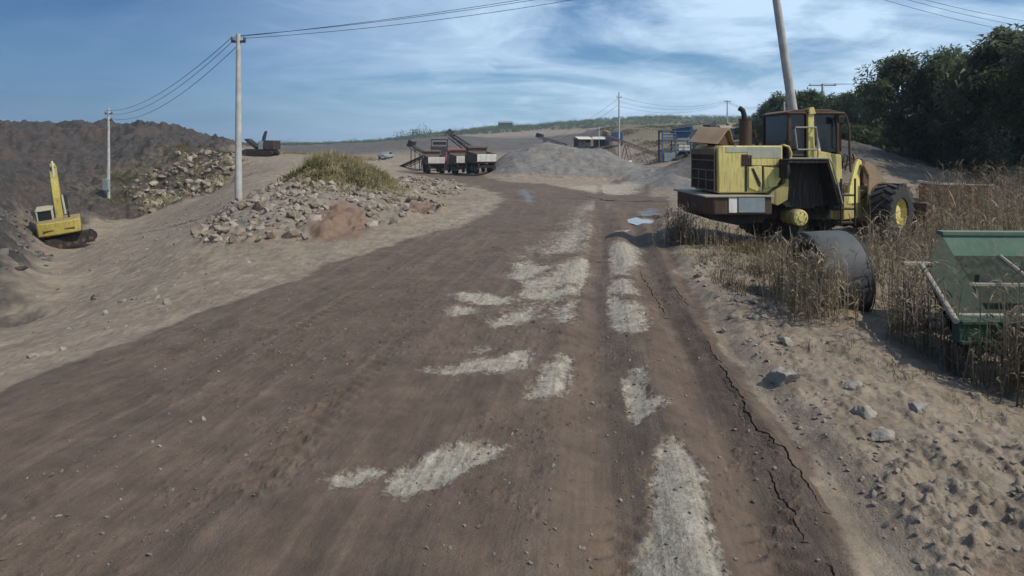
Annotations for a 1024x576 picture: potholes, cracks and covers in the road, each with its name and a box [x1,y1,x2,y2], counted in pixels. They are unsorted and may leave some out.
crack [820,560,840,576]
crack [636,268,692,319]
crack [702,339,833,542]
